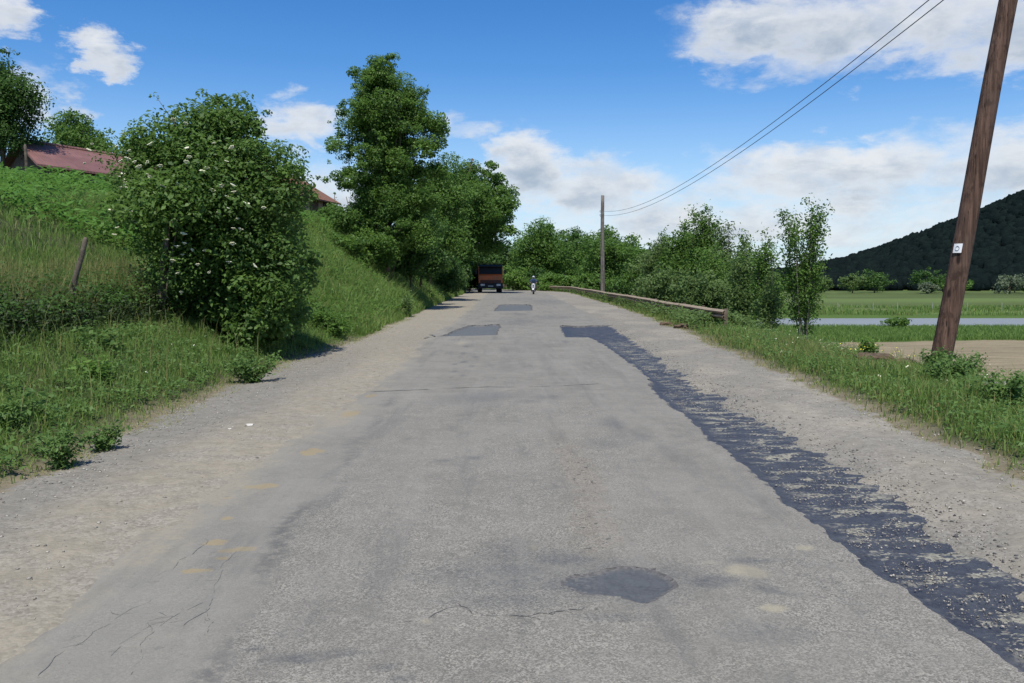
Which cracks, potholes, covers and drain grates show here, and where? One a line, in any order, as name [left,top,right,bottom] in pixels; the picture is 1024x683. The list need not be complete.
crack [403,603,583,625]
crack [38,541,242,675]
